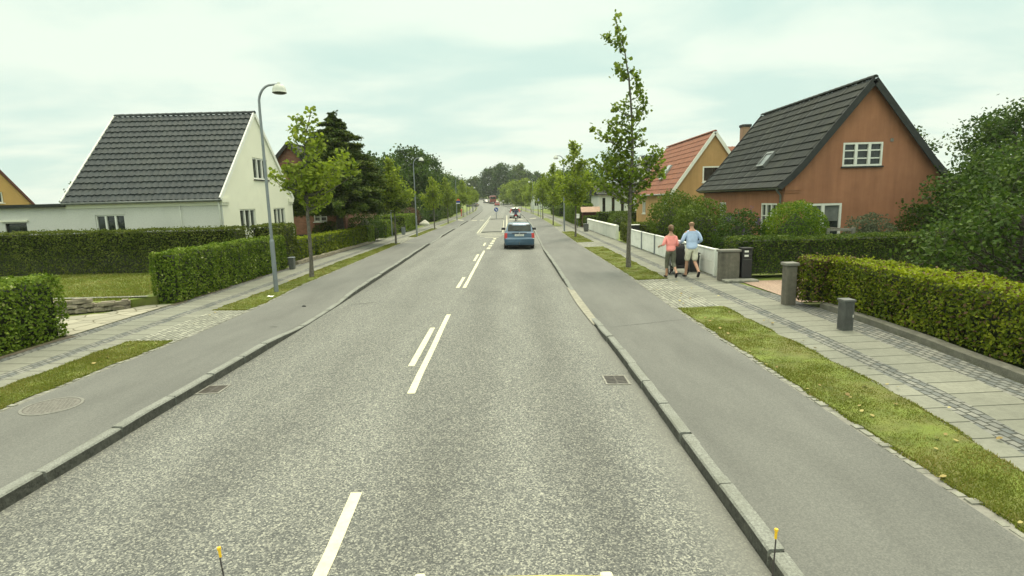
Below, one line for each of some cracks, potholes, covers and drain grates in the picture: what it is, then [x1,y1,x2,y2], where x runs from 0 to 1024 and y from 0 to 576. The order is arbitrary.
drain grate [194,384,232,395]
drain grate [601,375,631,385]
manhole cover [18,397,85,416]
